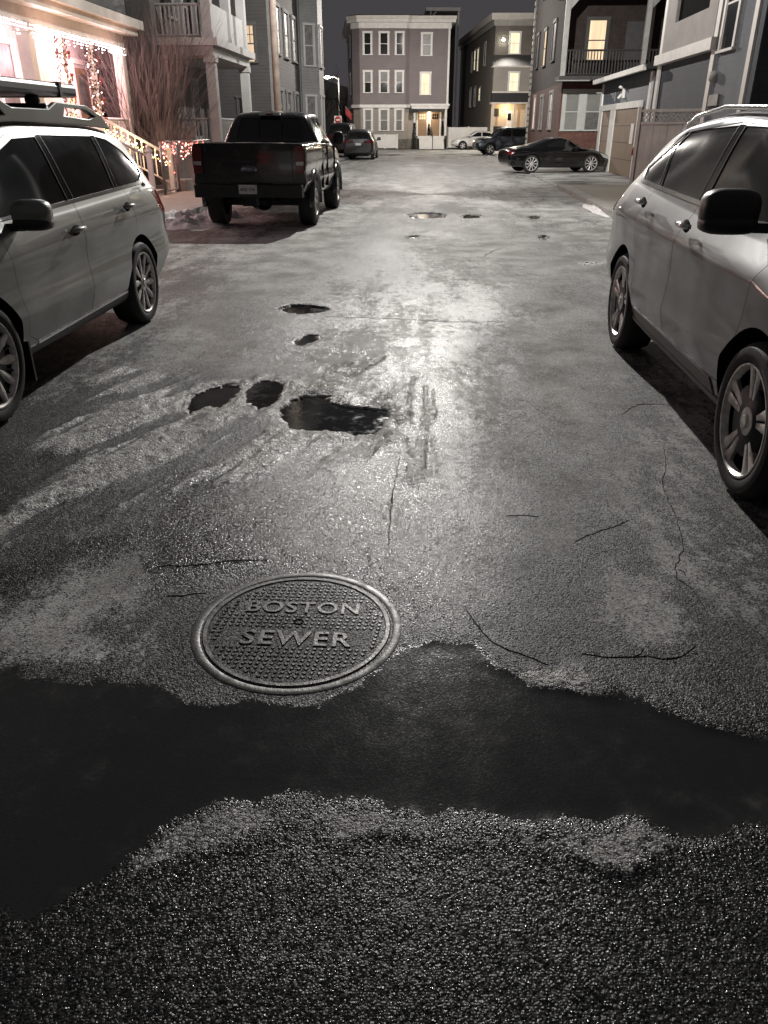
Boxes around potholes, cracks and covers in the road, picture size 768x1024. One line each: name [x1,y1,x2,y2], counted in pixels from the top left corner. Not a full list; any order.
crack [582,646,696,660]
crack [388,458,400,545]
pothole [240,378,289,411]
crack [465,606,548,665]
crack [575,519,630,542]
pothole [292,334,322,346]
pothole [181,383,245,415]
pothole [276,303,334,315]
pothole [271,392,398,437]
manhole cover [190,573,402,696]
crack [661,442,703,605]
